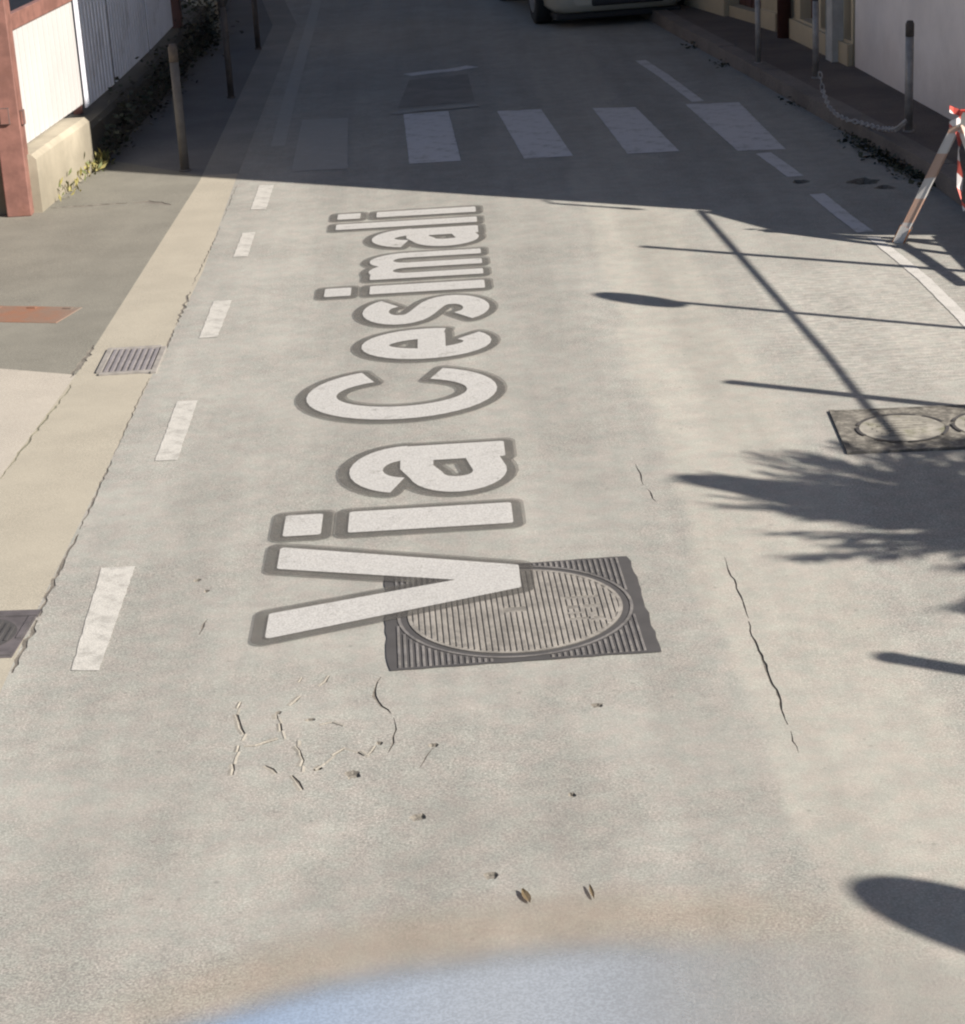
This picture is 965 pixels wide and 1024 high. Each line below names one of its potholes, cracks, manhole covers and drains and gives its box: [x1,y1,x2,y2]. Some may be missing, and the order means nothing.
manhole cover [384,556,662,671]
drain grate [96,345,167,376]
crack [227,675,397,791]
crack [724,557,799,753]
utility cover [829,404,965,455]
